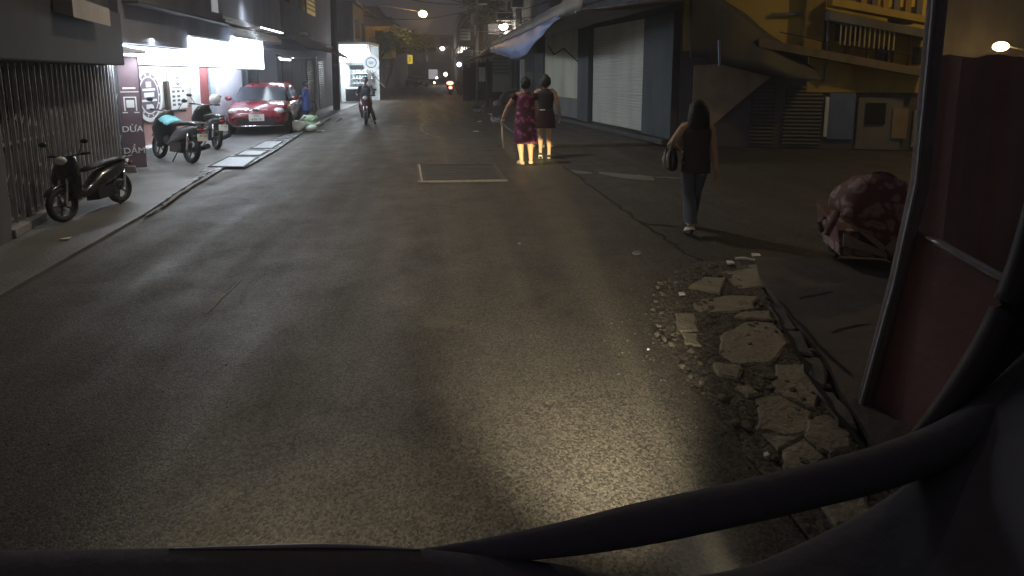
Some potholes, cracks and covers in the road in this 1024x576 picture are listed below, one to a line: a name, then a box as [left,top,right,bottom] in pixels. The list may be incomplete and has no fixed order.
manhole cover [207,156,259,169]
crack [207,277,244,313]
manhole cover [417,163,508,183]
crack [770,291,871,449]
crack [562,166,703,261]
manhole cover [250,140,283,149]
